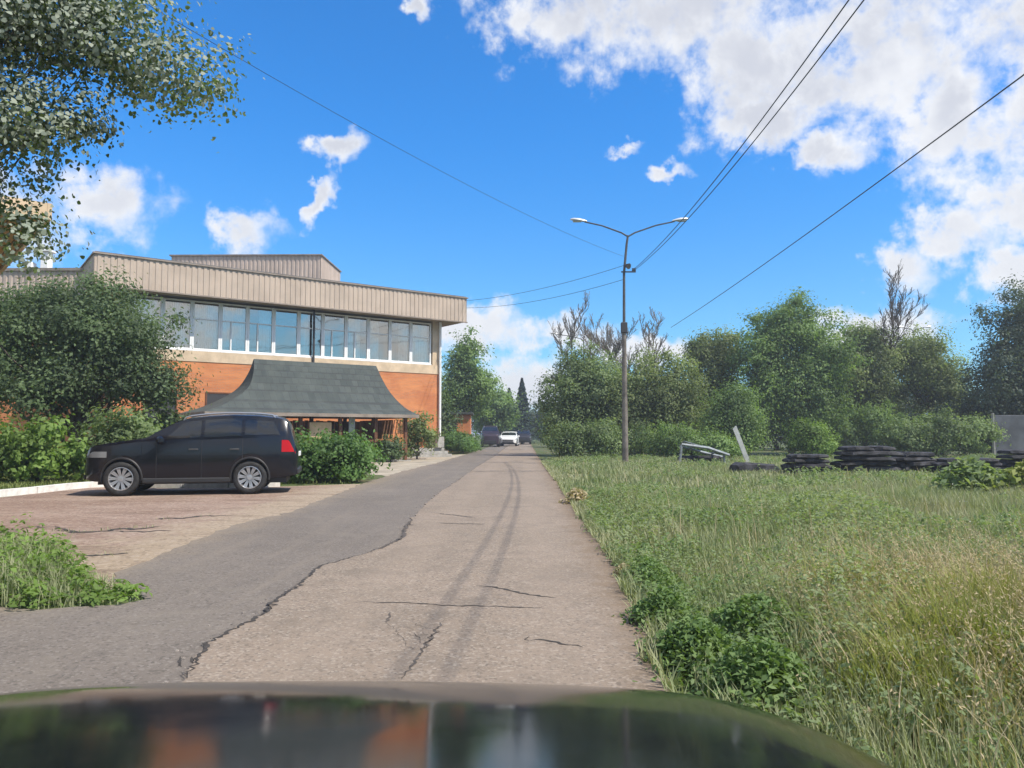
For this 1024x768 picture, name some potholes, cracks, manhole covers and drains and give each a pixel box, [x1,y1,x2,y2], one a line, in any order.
crack [24,515,230,533]
crack [351,585,556,677]
